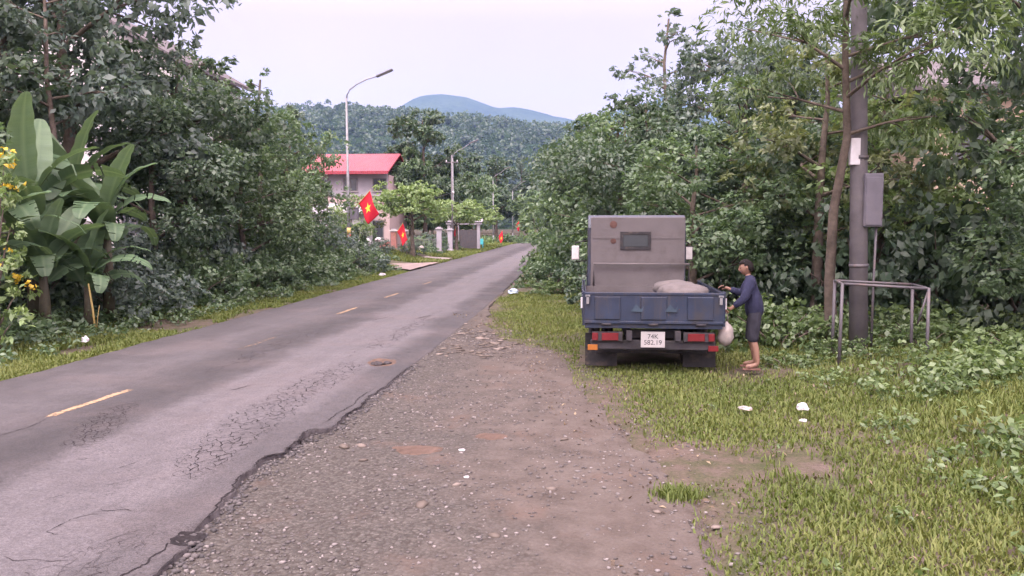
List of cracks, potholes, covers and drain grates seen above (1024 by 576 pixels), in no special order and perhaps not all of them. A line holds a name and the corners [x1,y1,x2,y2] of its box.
pothole [170,531,206,546]
crack [5,363,411,576]
